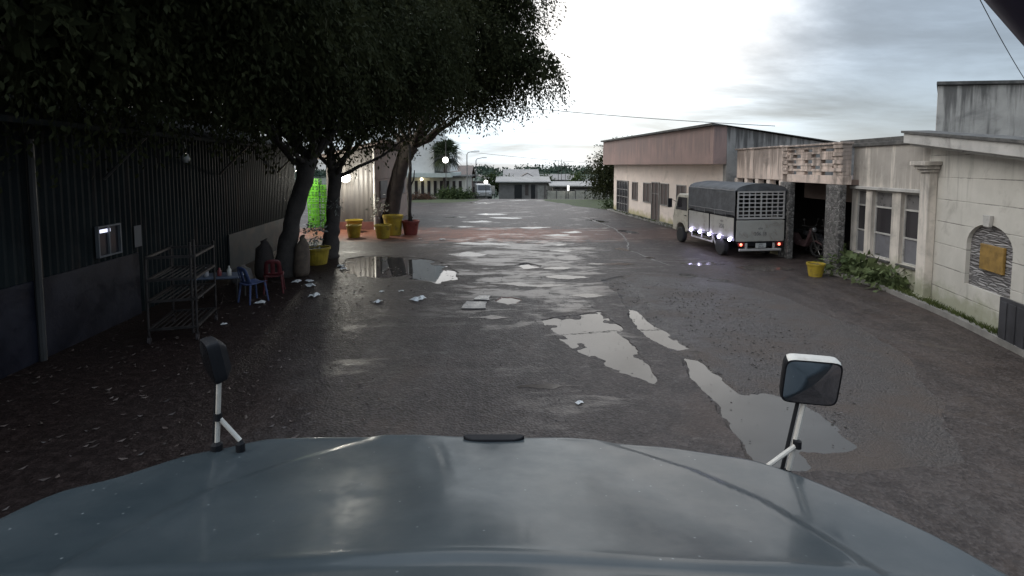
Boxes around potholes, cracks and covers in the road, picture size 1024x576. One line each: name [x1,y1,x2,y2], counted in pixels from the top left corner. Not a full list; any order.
pothole [542,311,667,386]
pothole [338,255,460,285]
crack [588,218,668,265]
